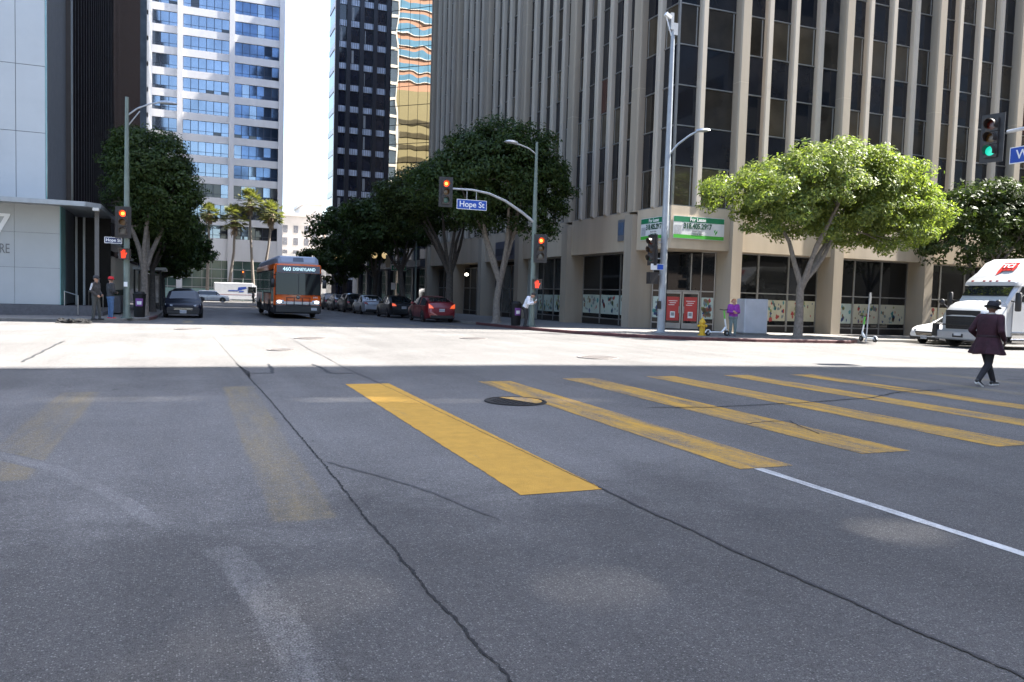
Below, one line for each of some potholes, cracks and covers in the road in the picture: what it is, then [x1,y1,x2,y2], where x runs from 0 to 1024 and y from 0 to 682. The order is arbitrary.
crack [0,341,199,370]
crack [213,337,513,682]
manhole cover [484,396,547,406]
